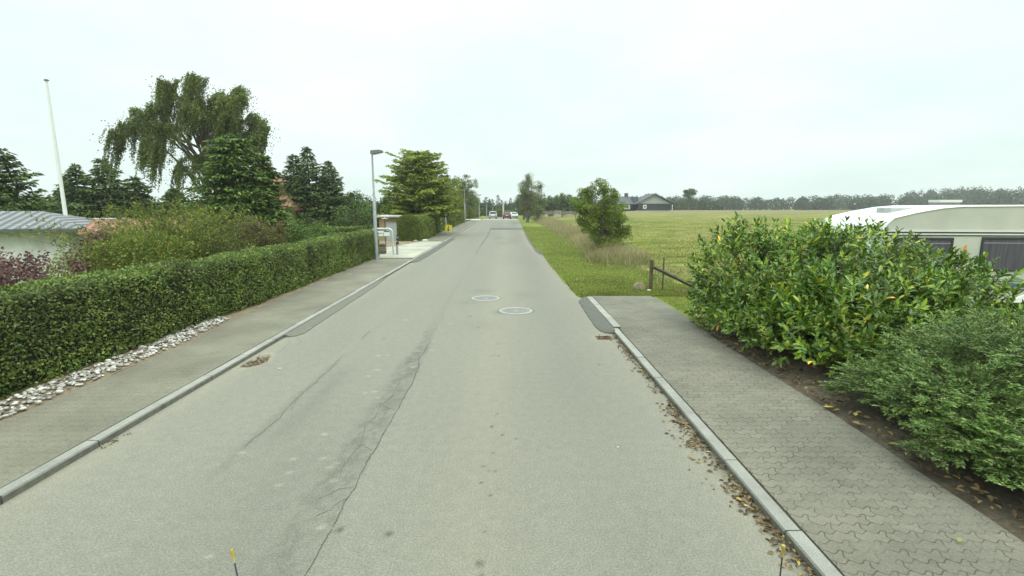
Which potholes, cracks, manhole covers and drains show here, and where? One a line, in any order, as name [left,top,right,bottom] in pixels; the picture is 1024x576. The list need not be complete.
crack [304,347,427,576]
